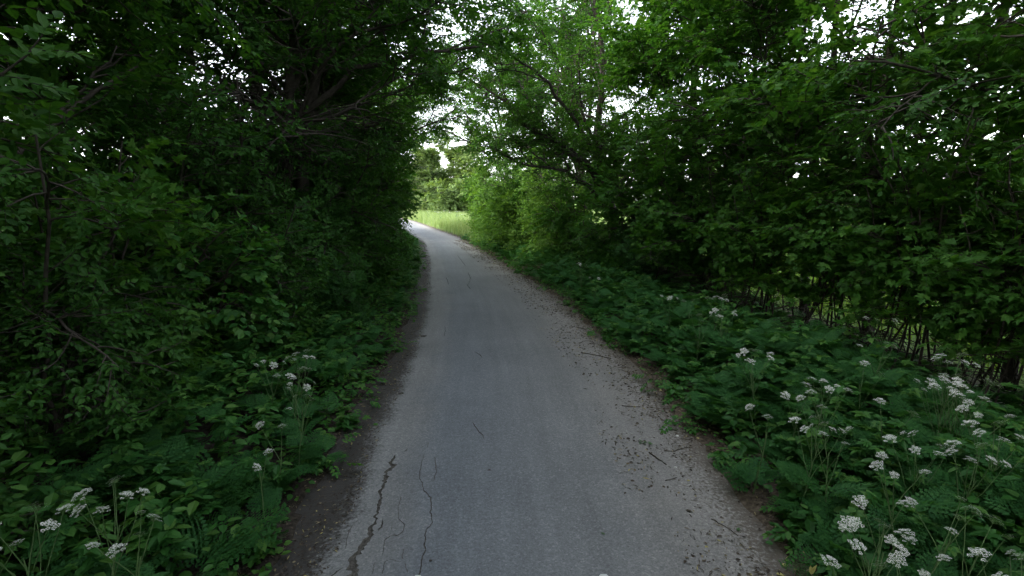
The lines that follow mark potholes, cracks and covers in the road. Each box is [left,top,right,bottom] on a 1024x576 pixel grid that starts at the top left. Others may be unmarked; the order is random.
crack [331,442,437,576]
